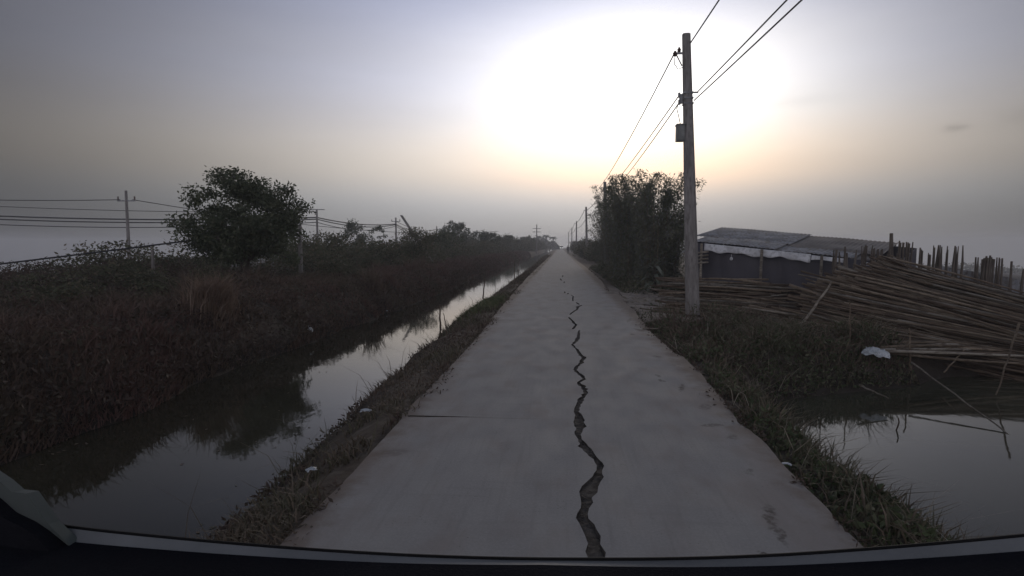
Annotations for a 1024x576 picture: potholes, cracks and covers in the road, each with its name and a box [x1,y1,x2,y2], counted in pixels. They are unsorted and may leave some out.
crack [560,275,606,557]
